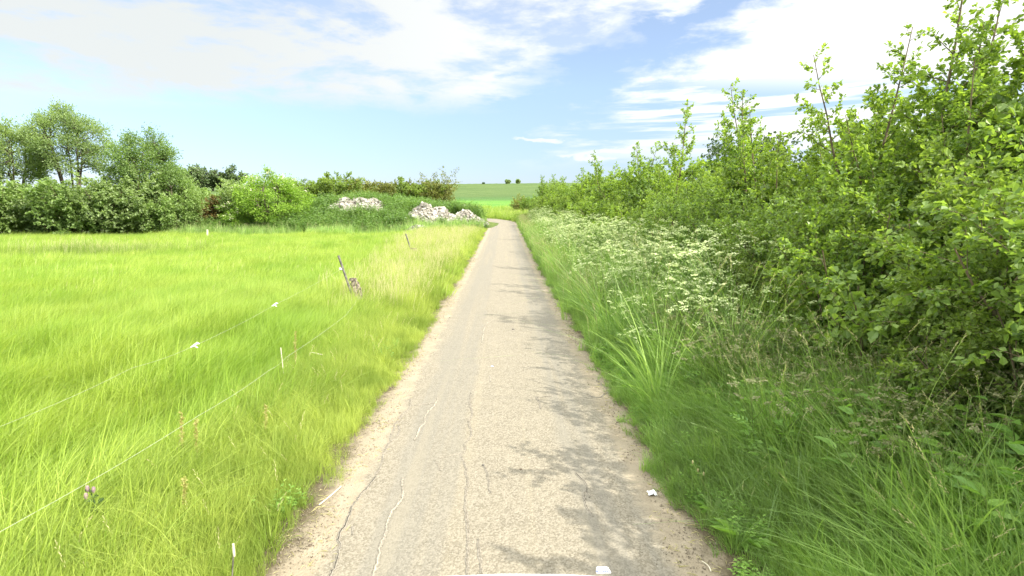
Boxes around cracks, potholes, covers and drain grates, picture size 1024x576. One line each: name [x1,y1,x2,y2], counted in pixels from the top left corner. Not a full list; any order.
crack [575,472,594,516]
crack [328,375,492,576]
